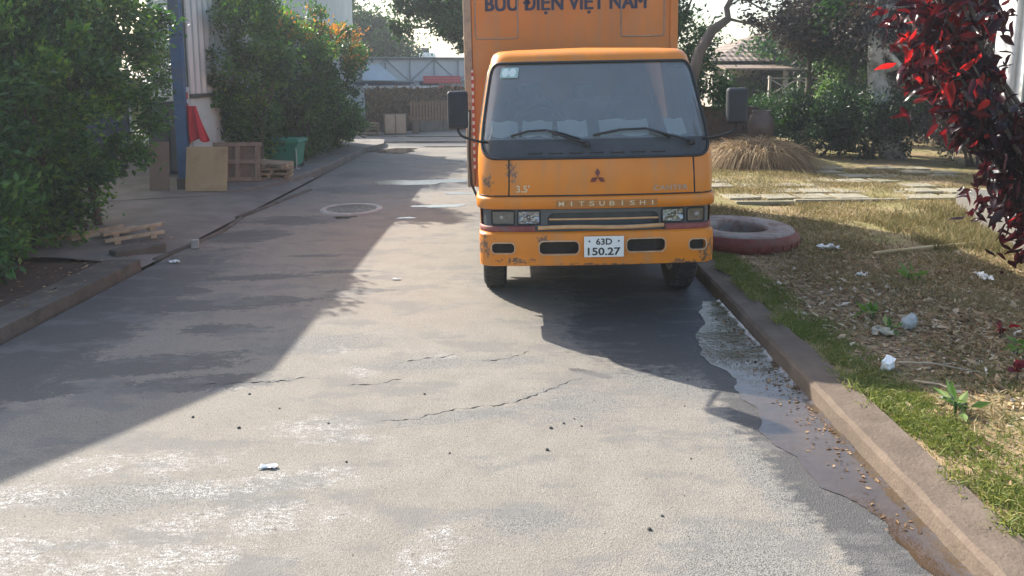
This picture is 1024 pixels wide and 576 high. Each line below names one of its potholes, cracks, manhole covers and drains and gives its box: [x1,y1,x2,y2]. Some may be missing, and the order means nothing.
crack [352,354,454,385]
manhole cover [320,203,384,216]
crack [385,378,582,421]
